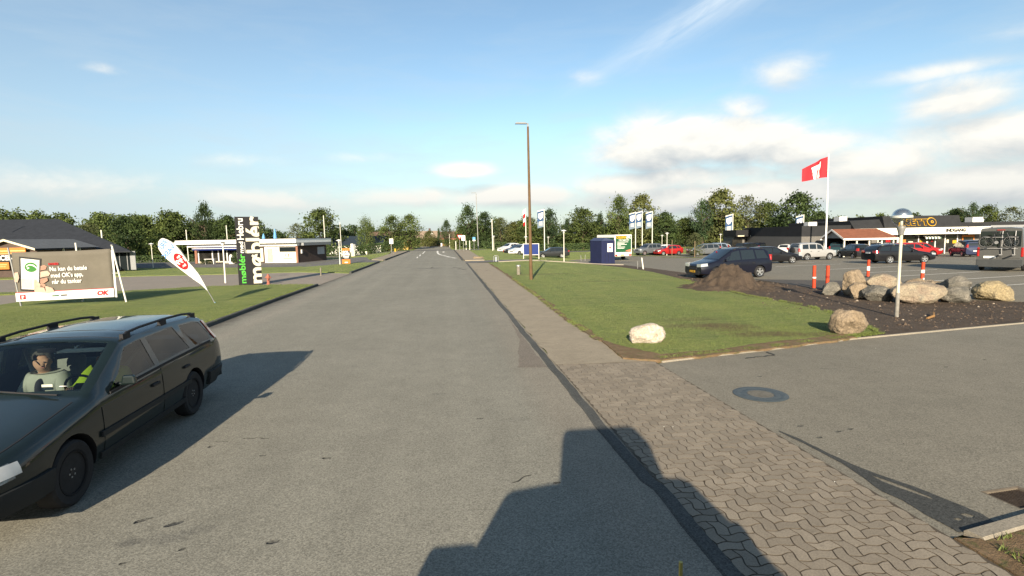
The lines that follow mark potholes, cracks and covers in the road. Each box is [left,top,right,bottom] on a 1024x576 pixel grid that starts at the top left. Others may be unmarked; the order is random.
manhole cover [733,387,789,402]
